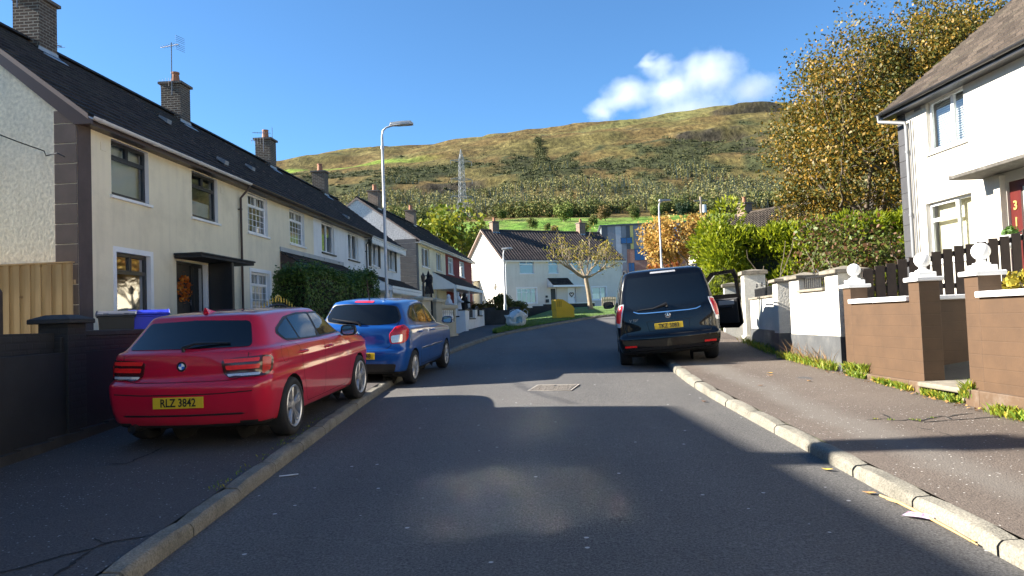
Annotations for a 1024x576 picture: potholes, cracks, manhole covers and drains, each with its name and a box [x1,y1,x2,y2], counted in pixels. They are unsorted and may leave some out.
crack [870,413,999,436]
crack [0,535,150,576]
